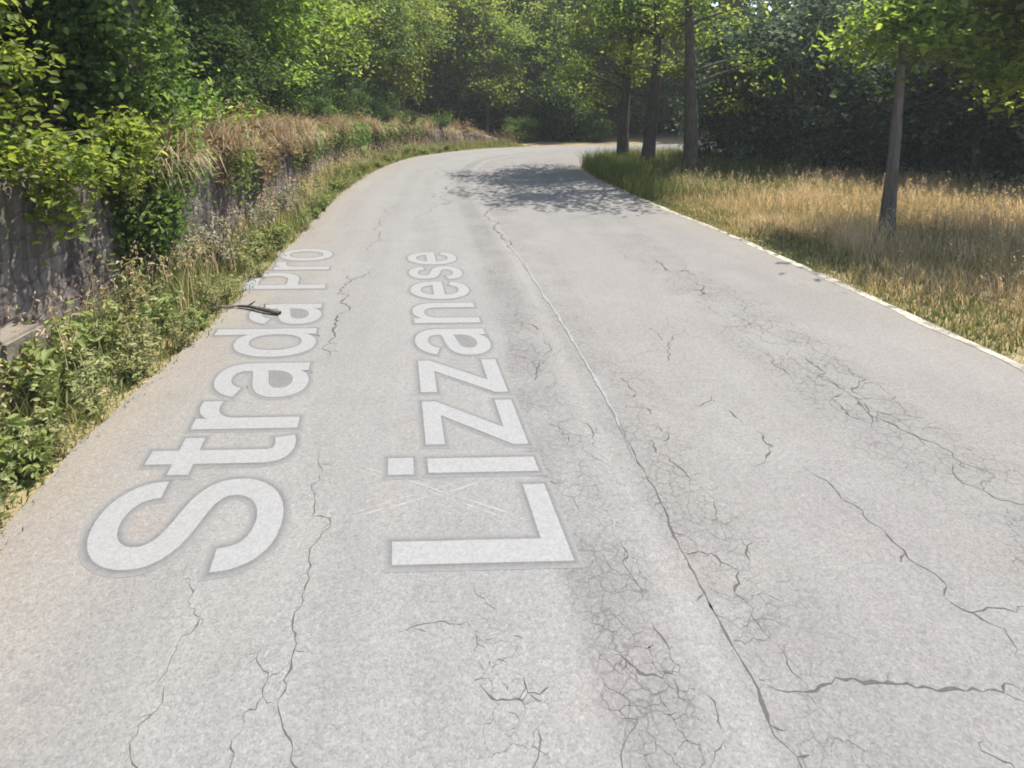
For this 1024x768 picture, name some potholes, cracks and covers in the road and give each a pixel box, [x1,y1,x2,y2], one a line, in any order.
crack [229,444,331,768]
crack [483,202,513,254]
crack [643,317,706,363]
crack [598,361,1024,704]
crack [321,267,369,361]
crack [400,618,549,768]
